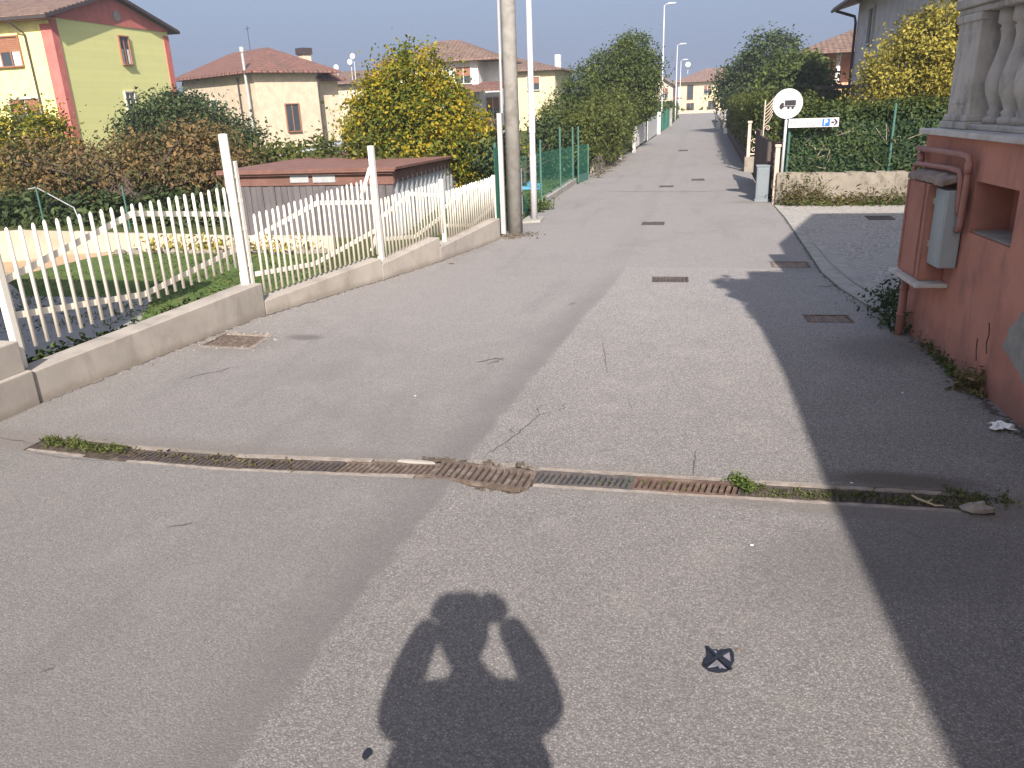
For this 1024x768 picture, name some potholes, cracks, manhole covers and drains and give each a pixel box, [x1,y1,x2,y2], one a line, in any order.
manhole cover [802,314,855,323]
crack [484,404,565,457]
manhole cover [193,331,275,350]
